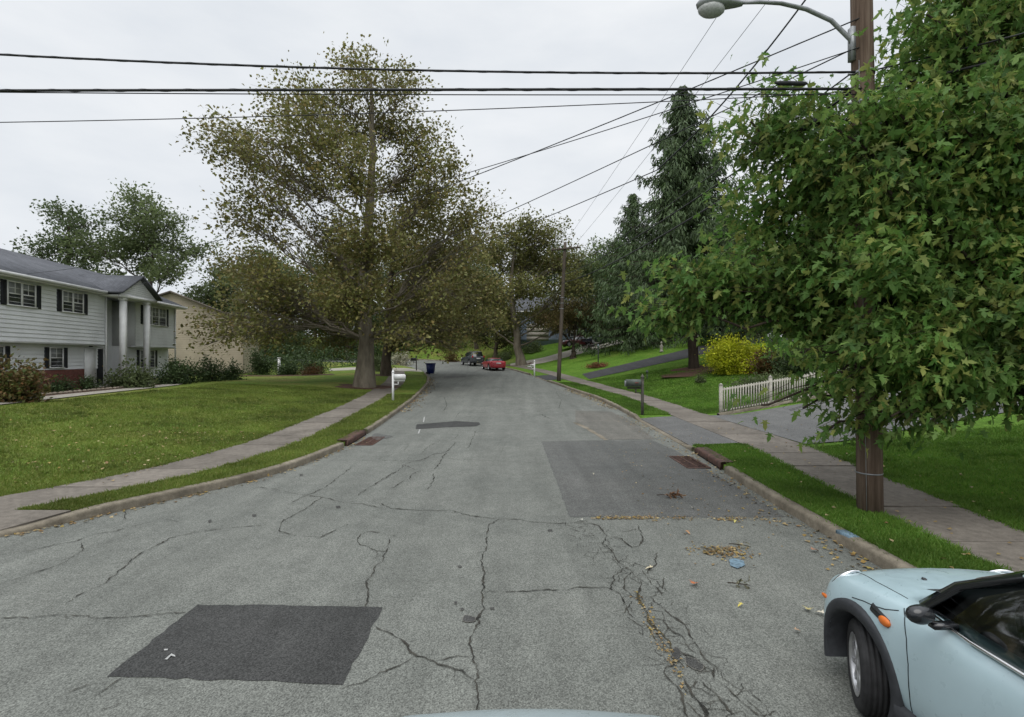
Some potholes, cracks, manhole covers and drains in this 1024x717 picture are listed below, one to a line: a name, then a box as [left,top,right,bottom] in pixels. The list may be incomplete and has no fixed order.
drain grate [669,447,731,470]
drain grate [338,430,385,446]
crack [0,433,772,717]
